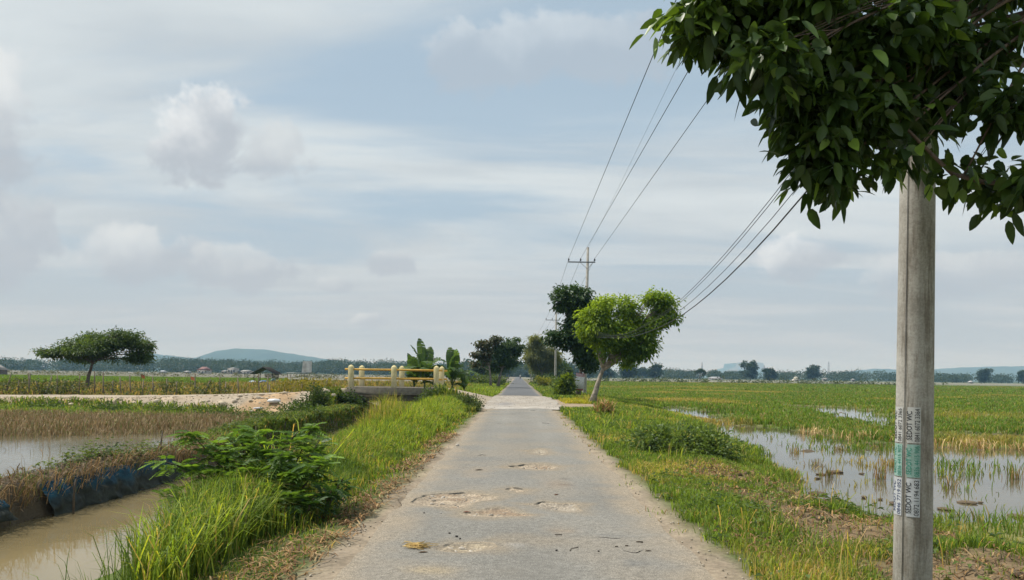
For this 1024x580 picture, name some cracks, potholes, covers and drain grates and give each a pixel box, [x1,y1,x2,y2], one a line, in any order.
pothole [460,507,535,517]
pothole [525,501,583,512]
pothole [433,542,498,553]
pothole [409,492,499,509]
